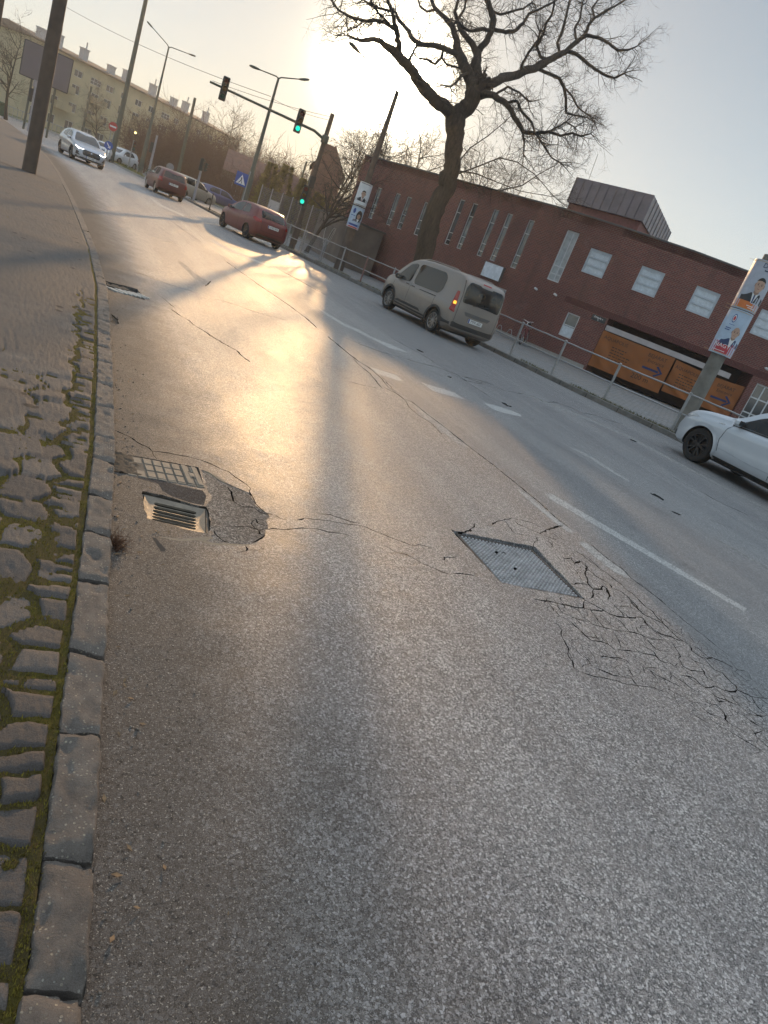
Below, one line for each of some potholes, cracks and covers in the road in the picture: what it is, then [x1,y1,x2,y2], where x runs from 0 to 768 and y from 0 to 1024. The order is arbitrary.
crack [451,518,768,759]
crack [133,272,277,362]
drain grate [142,494,209,533]
manhole cover [455,533,582,599]
crack [115,430,474,576]
crack [348,343,597,434]
